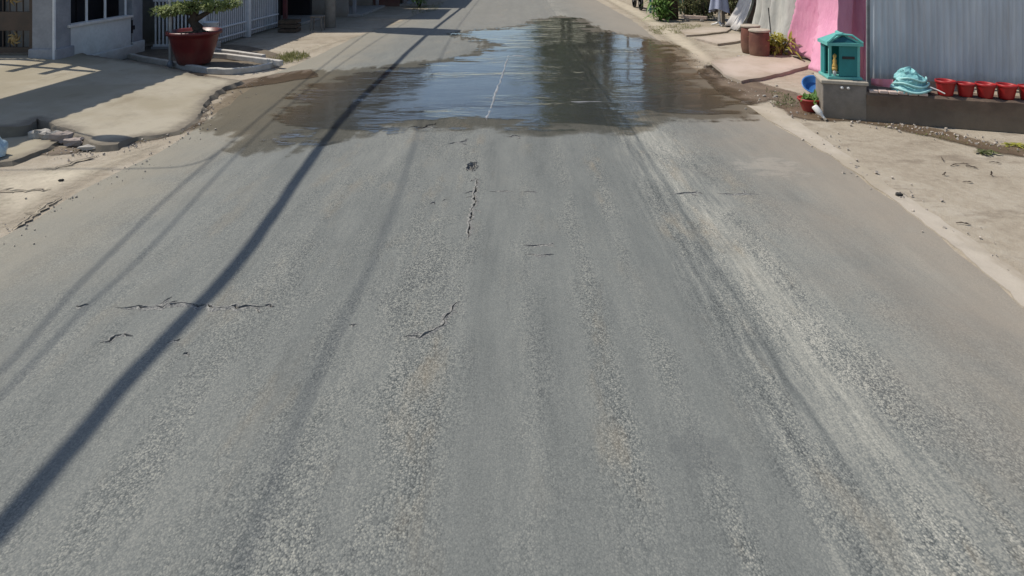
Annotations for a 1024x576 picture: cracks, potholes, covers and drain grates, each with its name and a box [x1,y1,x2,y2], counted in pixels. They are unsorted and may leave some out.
crack [101,332,133,343]
crack [414,178,535,240]
crack [76,297,274,313]
crack [404,301,461,340]
crack [525,243,555,257]
